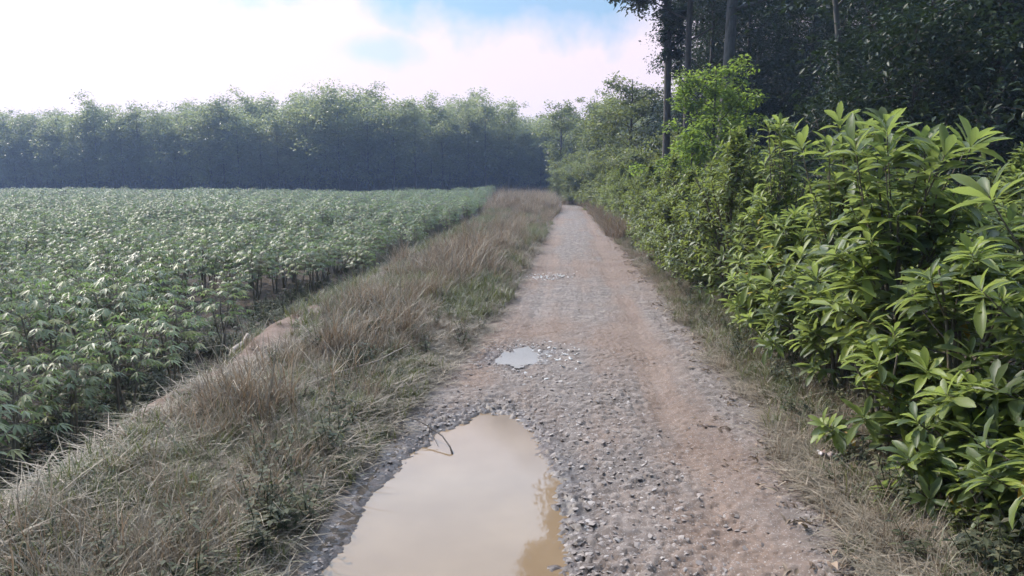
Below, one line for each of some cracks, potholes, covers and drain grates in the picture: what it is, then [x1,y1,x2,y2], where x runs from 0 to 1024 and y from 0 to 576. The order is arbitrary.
pothole [487,345,554,370]
pothole [303,407,585,576]
